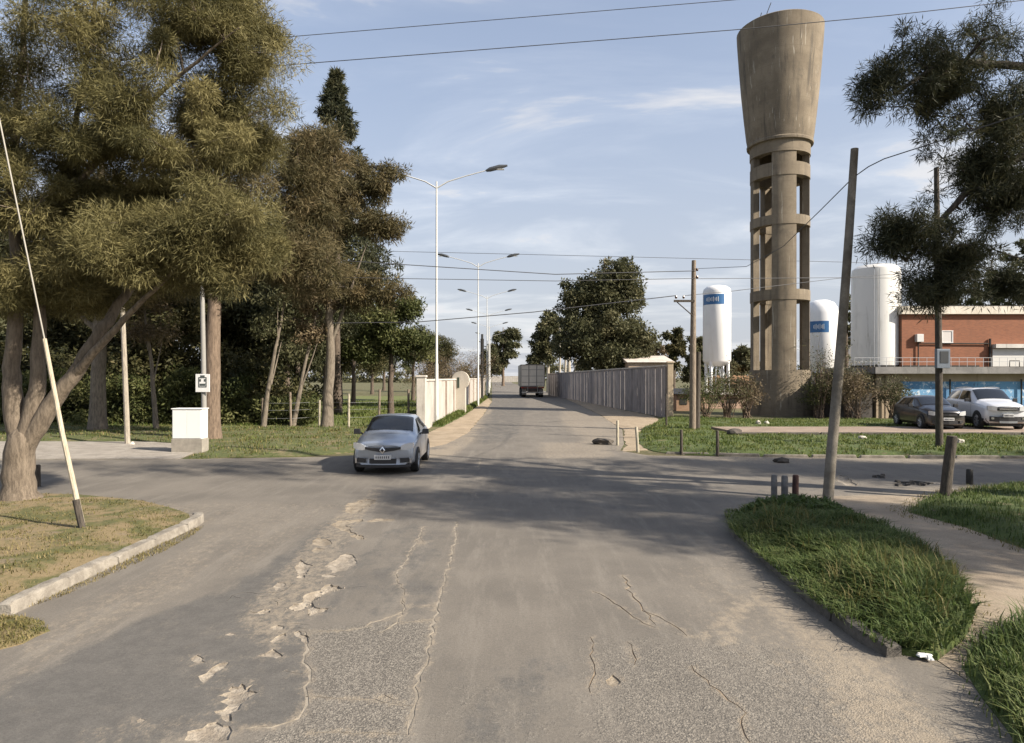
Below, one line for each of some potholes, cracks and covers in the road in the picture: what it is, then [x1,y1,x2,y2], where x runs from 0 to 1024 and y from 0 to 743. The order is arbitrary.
pothole [326,554,357,573]
pothole [214,683,258,722]
pothole [343,499,376,514]
crack [691,665,750,742]
crack [596,575,687,636]
pothole [185,722,233,743]
pothole [312,538,332,547]
crack [246,631,412,735]
pothole [284,582,345,616]
pothole [198,662,229,683]
pothole [295,559,313,579]
